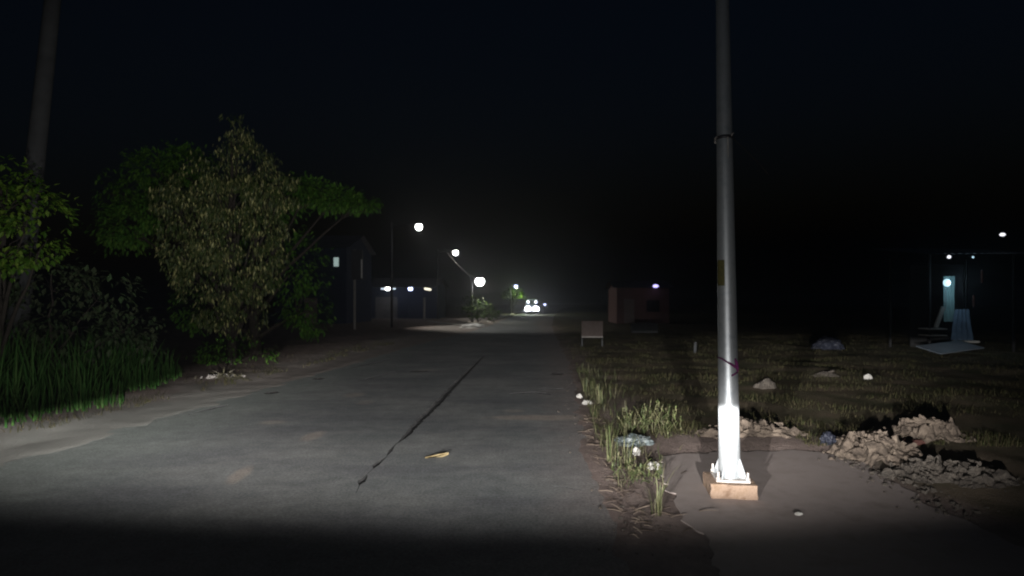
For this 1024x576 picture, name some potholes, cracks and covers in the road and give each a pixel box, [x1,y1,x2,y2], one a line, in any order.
crack [347,355,485,493]
